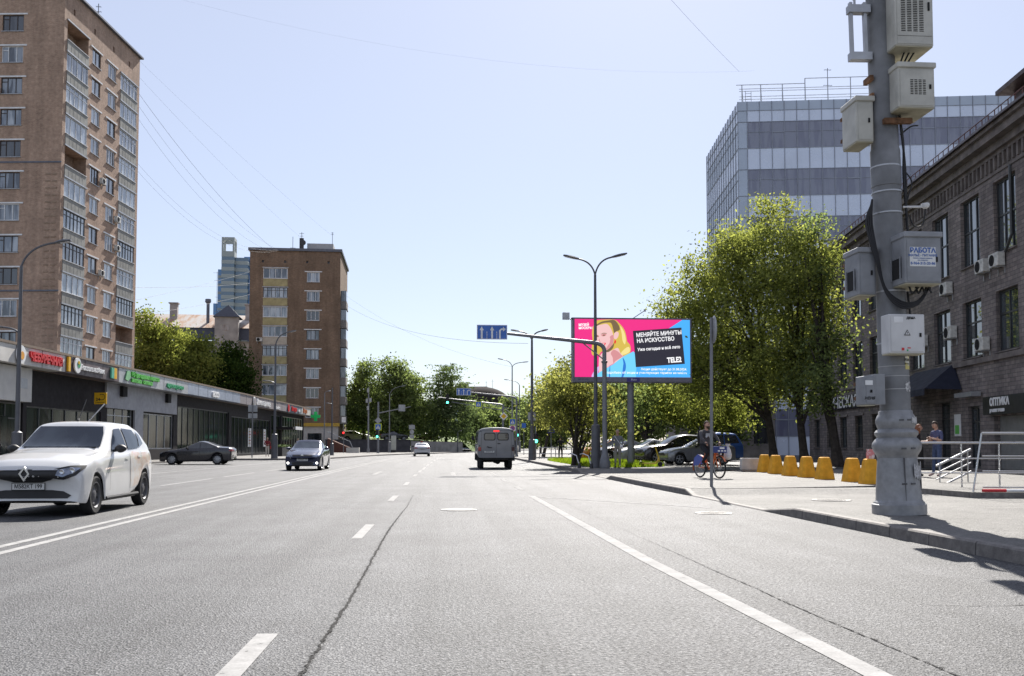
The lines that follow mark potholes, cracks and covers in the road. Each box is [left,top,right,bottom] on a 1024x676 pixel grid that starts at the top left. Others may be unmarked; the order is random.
crack [298,500,410,676]
